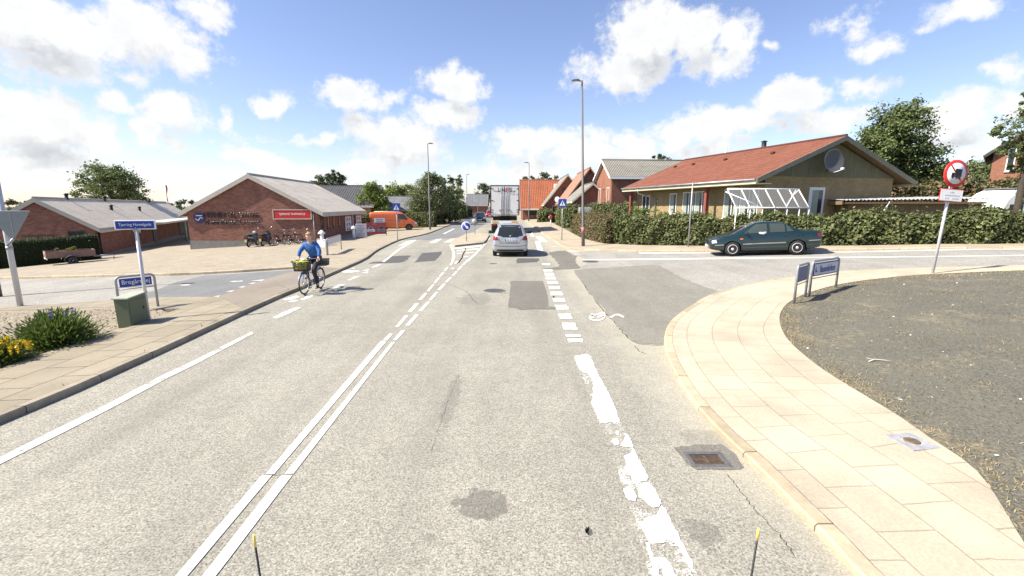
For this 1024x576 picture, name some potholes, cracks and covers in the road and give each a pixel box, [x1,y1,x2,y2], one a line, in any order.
utility cover [884,433,941,451]
drain grate [683,451,733,467]
crack [727,474,795,556]
